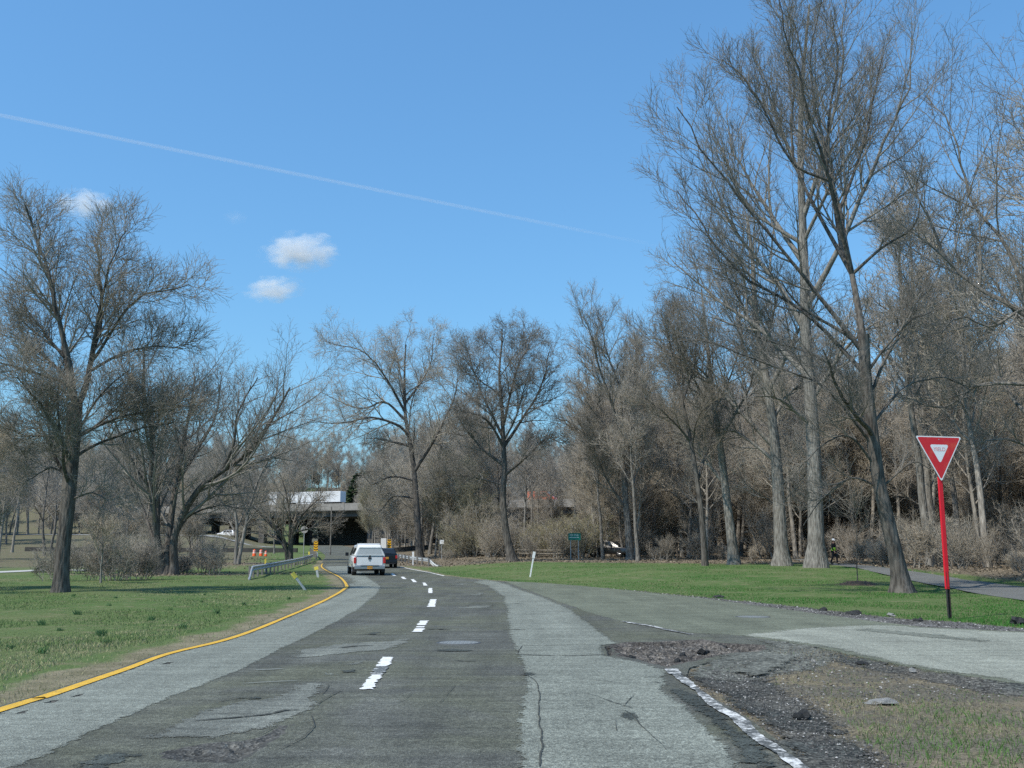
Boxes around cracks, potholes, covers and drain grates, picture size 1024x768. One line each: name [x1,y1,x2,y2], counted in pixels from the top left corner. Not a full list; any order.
crack [174,668,340,747]
pothole [160,724,295,764]
crack [575,677,678,752]
crack [520,673,544,767]
